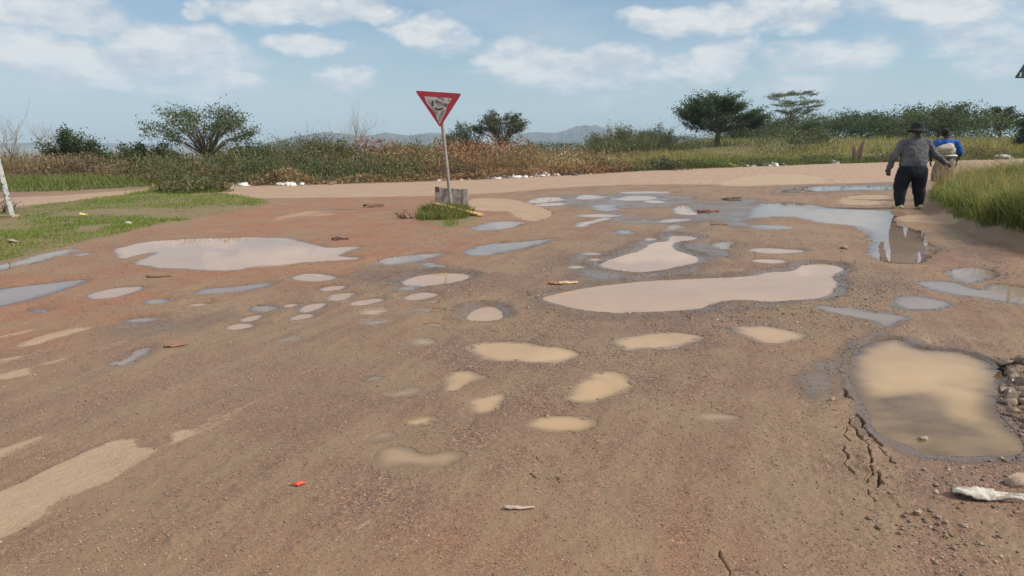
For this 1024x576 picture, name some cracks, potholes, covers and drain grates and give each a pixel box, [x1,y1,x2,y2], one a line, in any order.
pothole [446,300,525,324]
pothole [901,277,1024,308]
pothole [360,440,480,477]
pothole [826,332,1024,467]
pothole [930,264,1018,284]
pothole [100,235,374,272]
pothole [519,259,864,317]
pothole [605,329,713,354]
pothole [552,366,651,406]
pothole [513,411,613,439]
pothole [457,337,590,367]
pothole [722,323,817,347]
